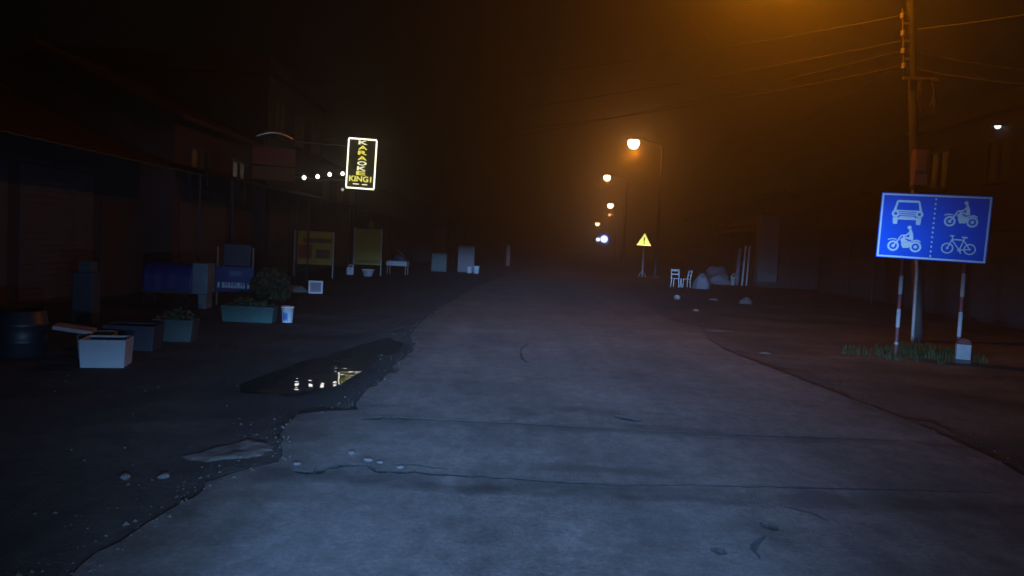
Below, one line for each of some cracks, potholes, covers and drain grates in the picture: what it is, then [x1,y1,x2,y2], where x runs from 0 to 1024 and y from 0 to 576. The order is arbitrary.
crack [290,462,999,560]
crack [362,416,898,441]
